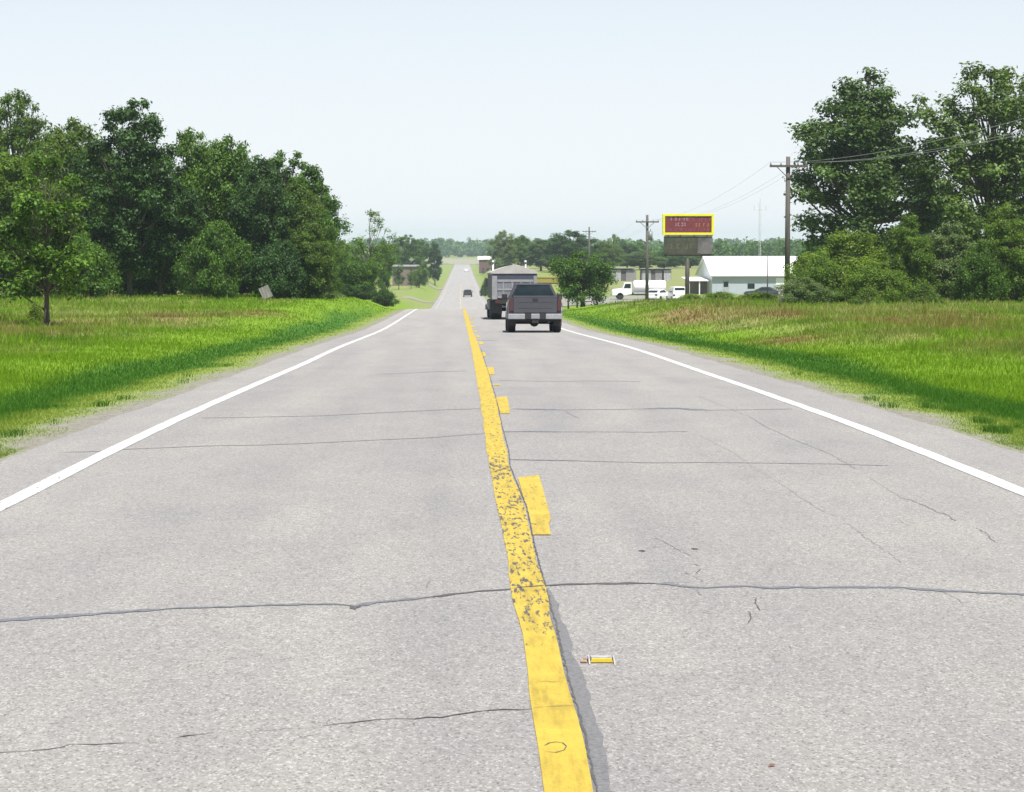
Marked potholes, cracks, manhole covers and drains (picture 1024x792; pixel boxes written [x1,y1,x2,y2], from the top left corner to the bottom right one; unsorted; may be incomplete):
crack [2,705,566,752]
crack [504,398,995,603]
crack [657,538,791,650]
